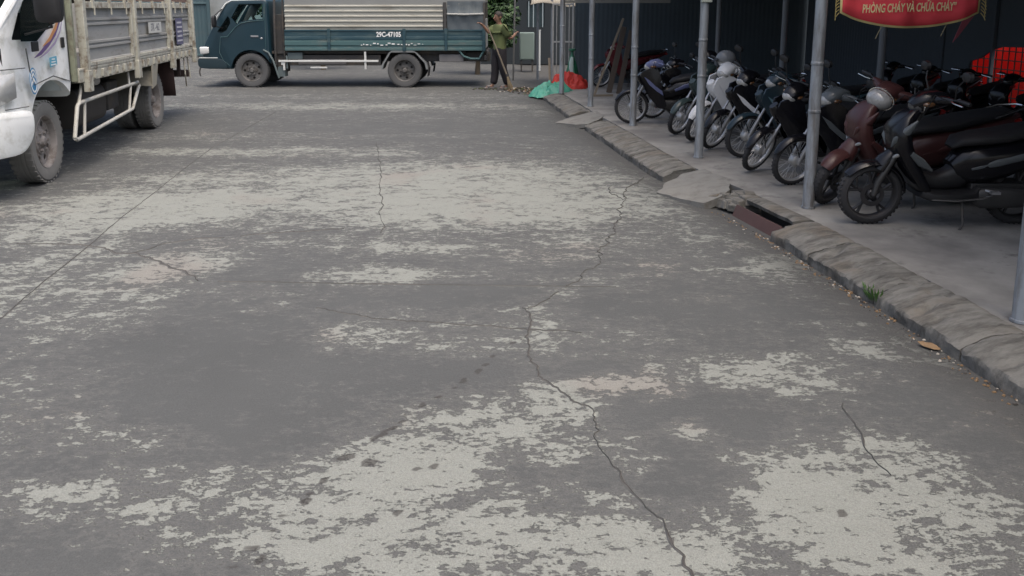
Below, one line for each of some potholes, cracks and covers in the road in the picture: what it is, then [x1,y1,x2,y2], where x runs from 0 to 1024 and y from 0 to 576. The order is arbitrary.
crack [376,142,386,233]
crack [316,177,695,576]
crack [842,403,891,475]
